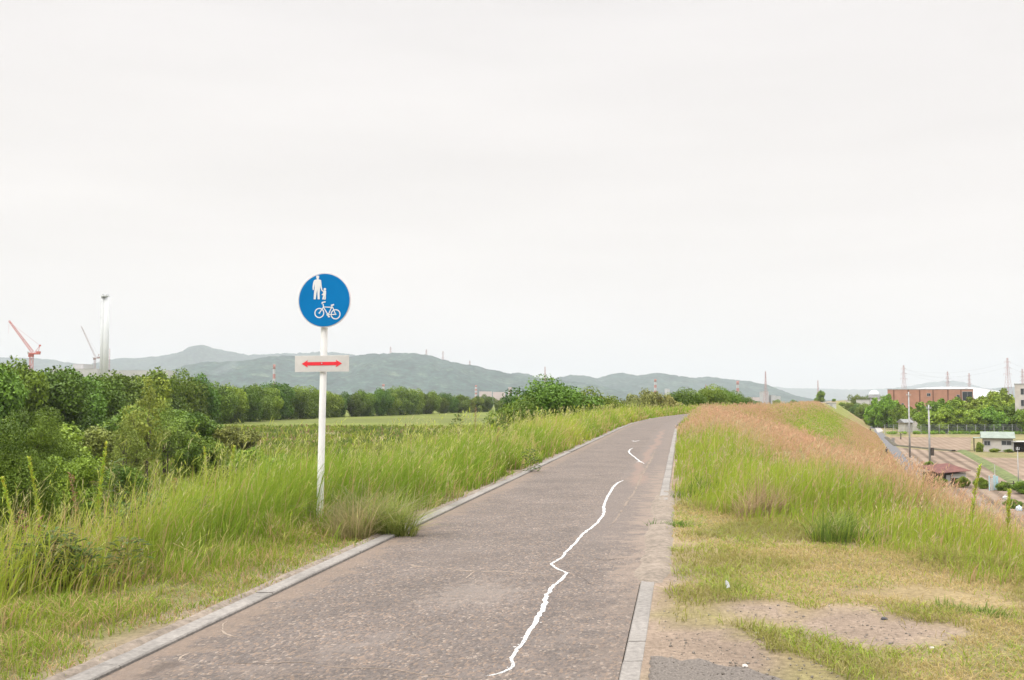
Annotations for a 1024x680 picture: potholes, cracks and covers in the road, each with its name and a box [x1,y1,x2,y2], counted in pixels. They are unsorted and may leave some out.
crack [410,448,643,676]
